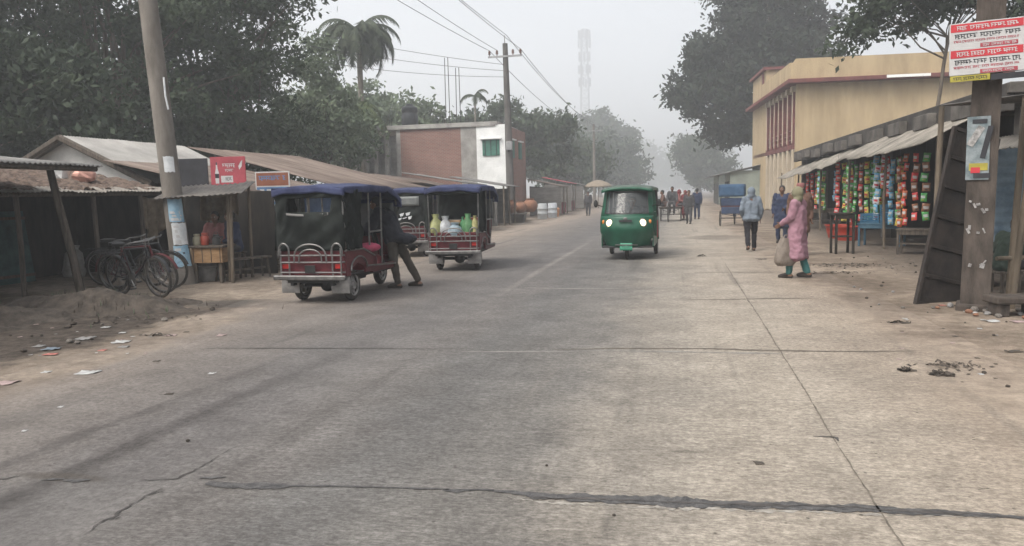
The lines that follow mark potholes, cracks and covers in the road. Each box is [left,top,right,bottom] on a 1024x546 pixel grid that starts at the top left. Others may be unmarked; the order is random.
crack [88,448,232,532]
